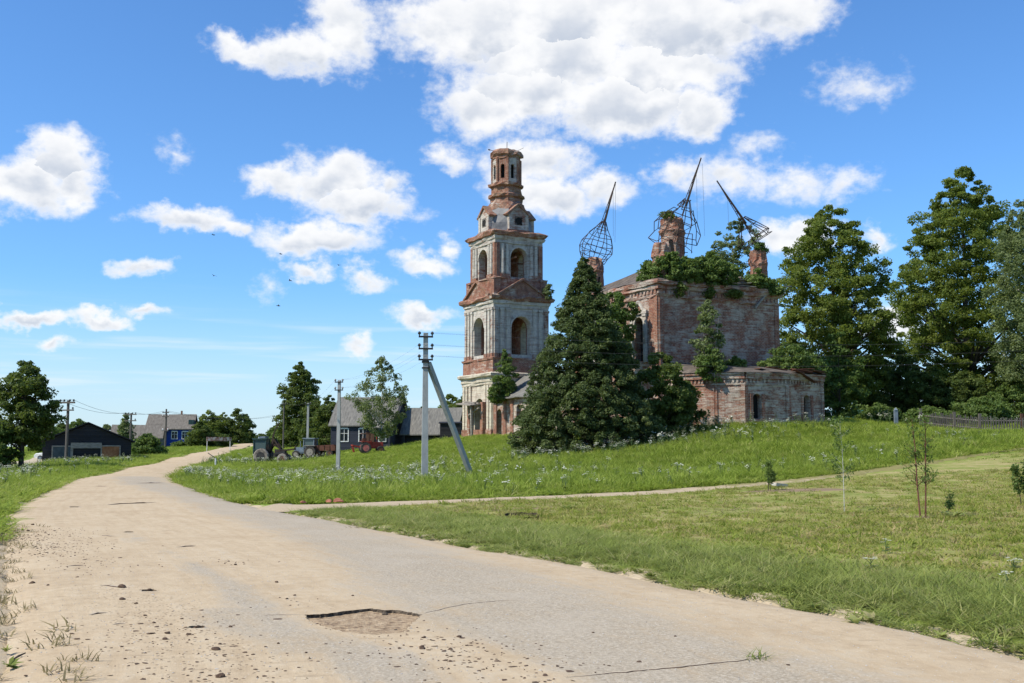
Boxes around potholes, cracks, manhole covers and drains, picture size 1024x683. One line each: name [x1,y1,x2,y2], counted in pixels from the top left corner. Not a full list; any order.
crack [424,600,508,614]
pothole [305,608,420,635]
crack [567,655,770,678]
